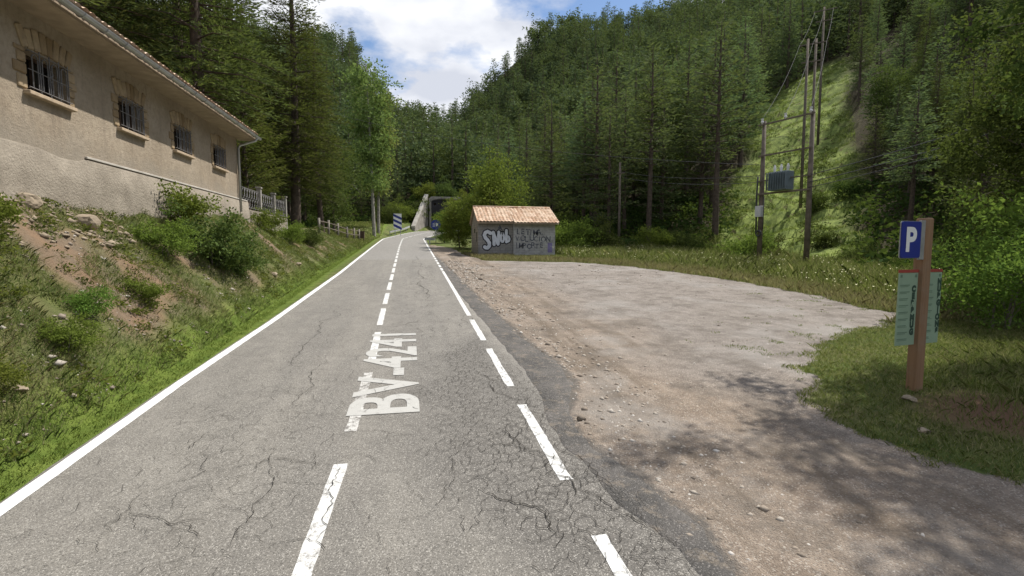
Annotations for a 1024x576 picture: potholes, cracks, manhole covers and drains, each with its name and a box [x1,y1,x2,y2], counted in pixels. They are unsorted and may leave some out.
crack [411,335,711,576]
crack [0,277,385,576]
